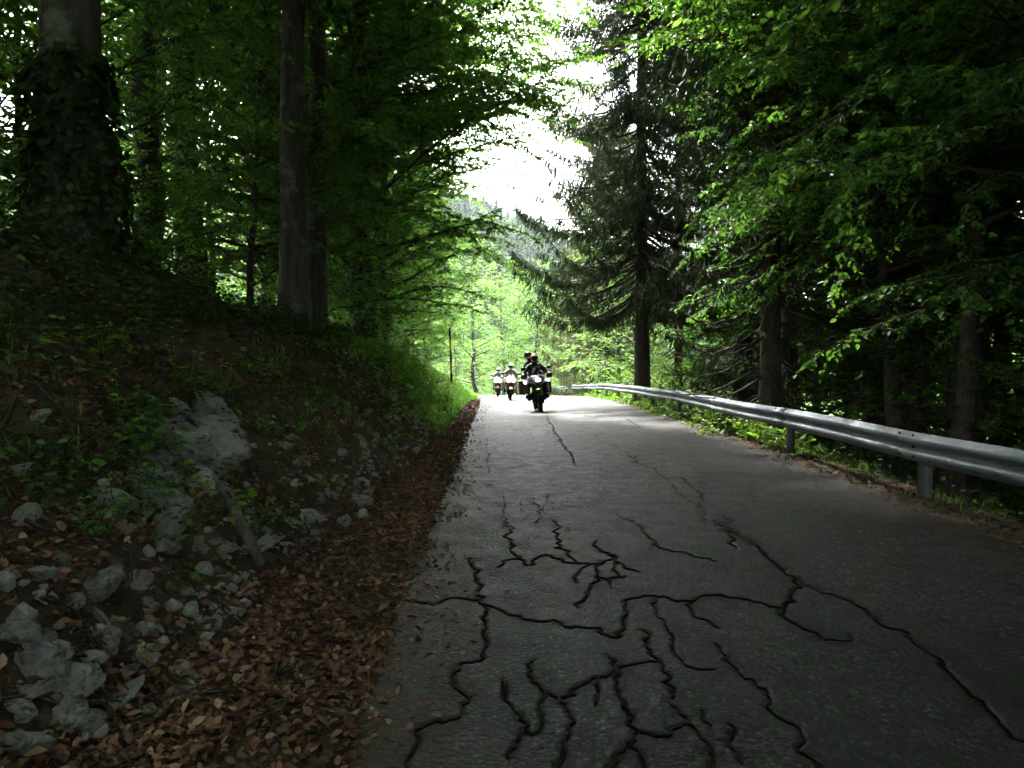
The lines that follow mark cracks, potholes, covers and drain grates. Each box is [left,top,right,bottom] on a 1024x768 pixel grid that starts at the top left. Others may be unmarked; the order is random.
crack [403,415,1024,768]
